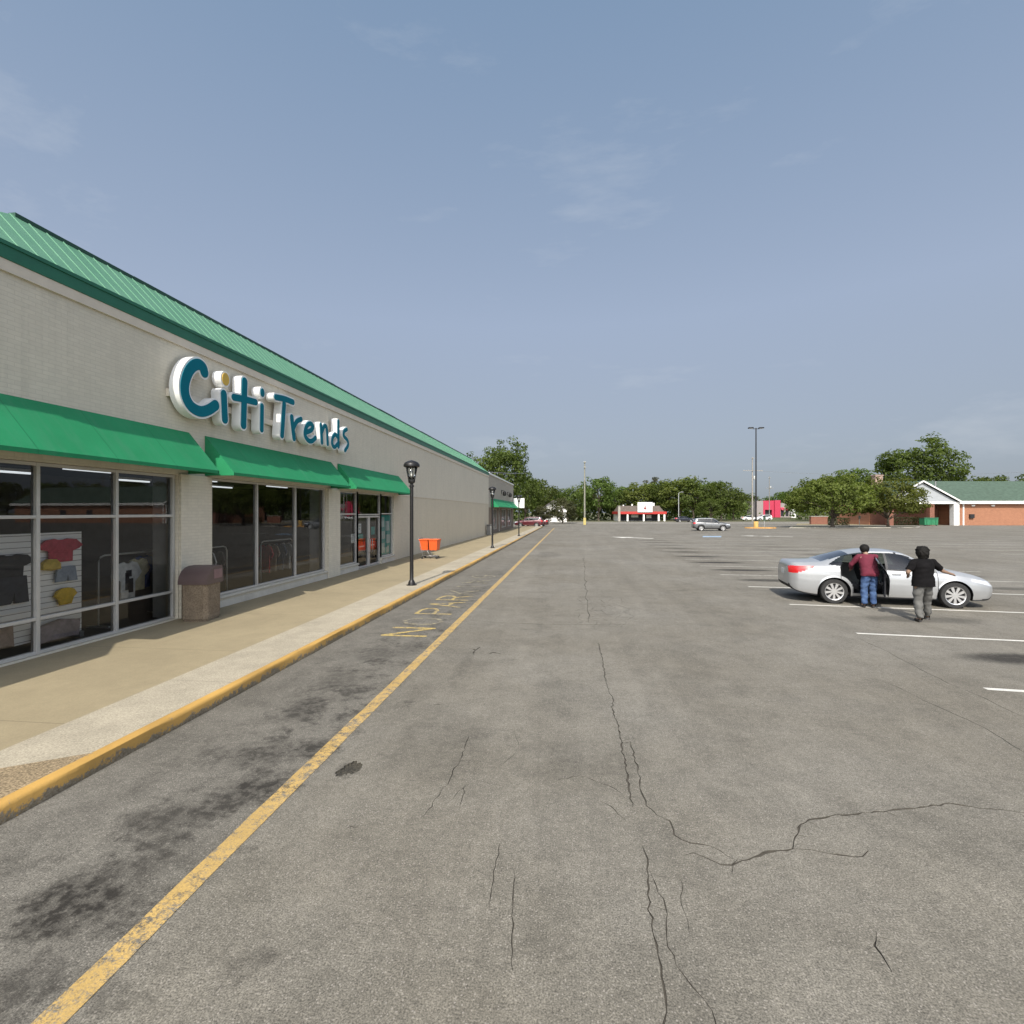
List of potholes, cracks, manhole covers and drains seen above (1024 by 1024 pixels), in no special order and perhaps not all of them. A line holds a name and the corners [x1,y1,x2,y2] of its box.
crack [576,561,634,627]
crack [544,643,1023,872]
crack [425,732,519,814]
crack [639,846,716,1024]
crack [869,933,892,972]
crack [489,844,515,971]
